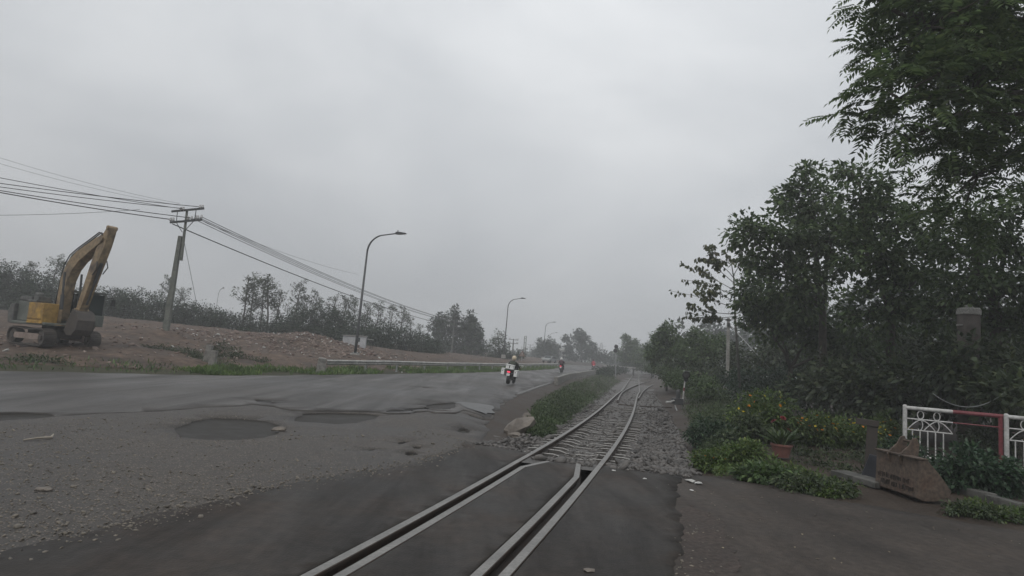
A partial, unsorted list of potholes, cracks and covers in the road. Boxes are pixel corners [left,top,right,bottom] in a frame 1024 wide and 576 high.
pothole [294,413,378,424]
pothole [174,419,280,440]
pothole [0,413,54,421]
